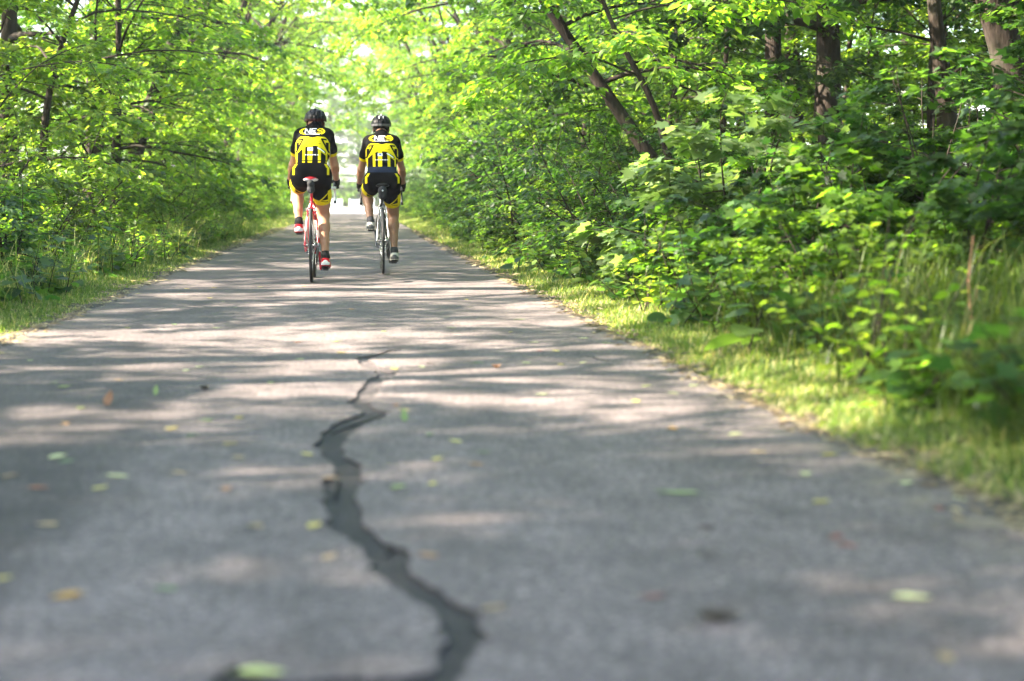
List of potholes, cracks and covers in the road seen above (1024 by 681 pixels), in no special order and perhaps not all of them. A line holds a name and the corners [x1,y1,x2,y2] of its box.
crack [213,349,492,681]
